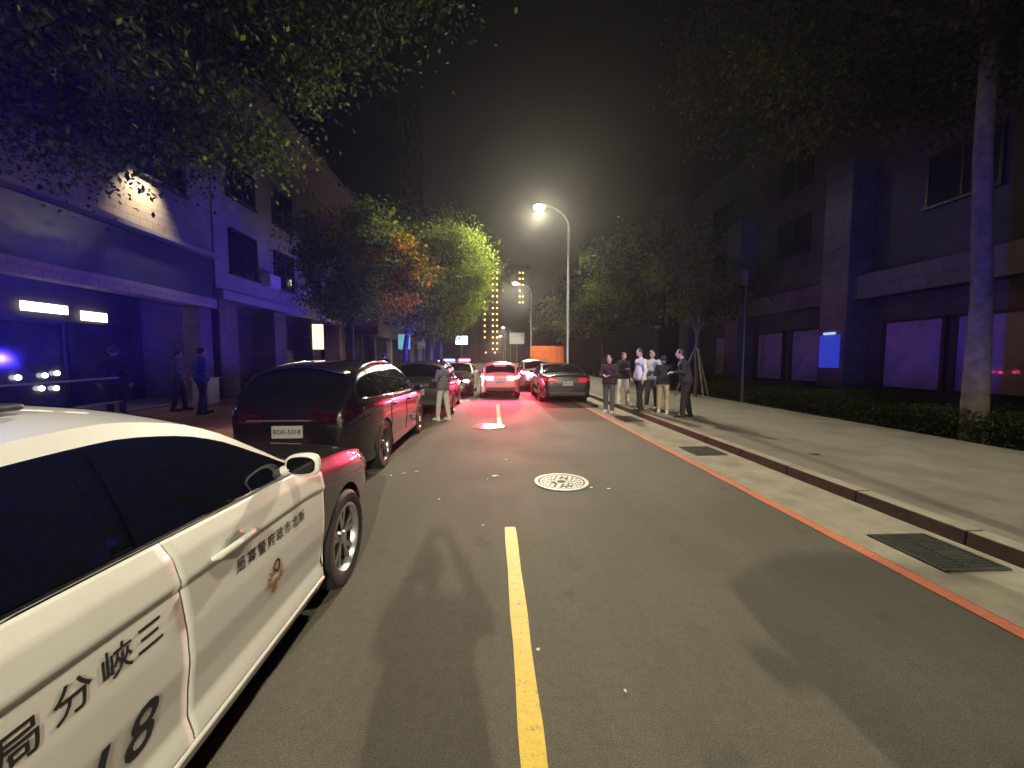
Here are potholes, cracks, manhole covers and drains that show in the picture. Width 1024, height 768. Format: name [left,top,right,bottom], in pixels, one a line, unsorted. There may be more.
manhole cover [535,473,589,491]
